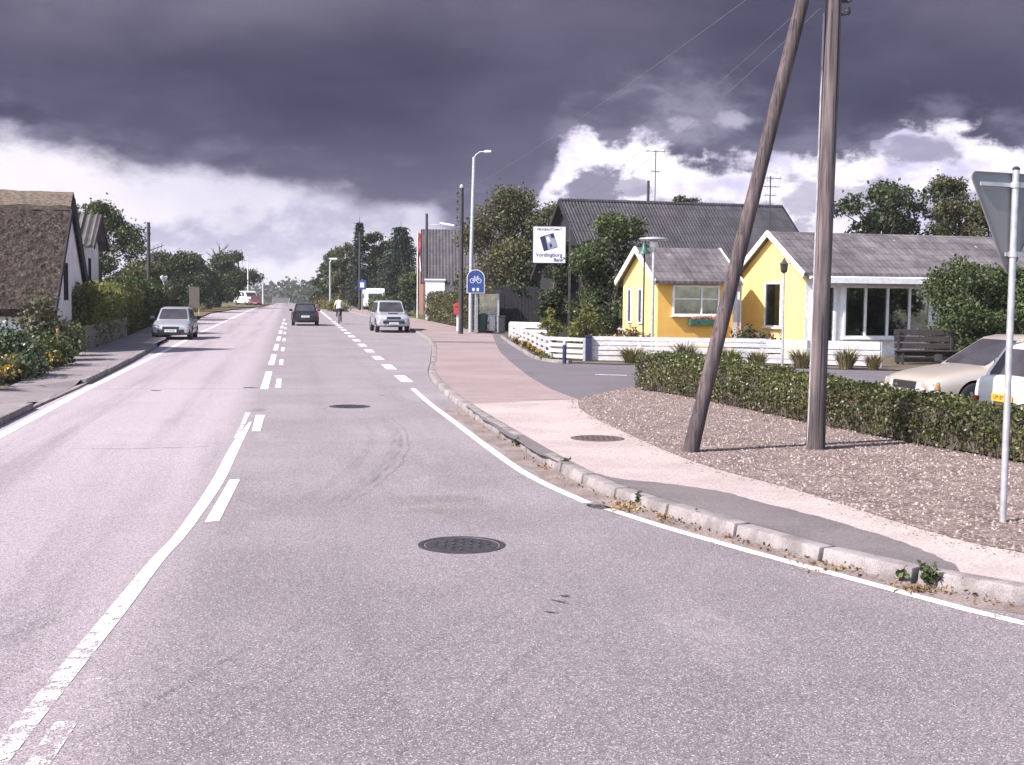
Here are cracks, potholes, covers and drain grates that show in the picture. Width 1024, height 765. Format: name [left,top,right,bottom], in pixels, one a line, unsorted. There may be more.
manhole cover [418,536,506,554]
